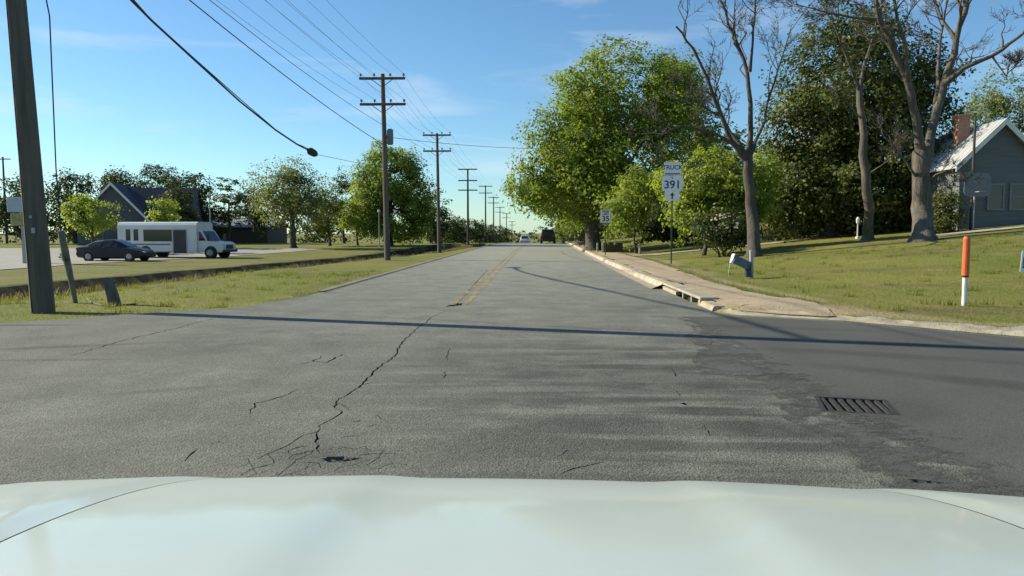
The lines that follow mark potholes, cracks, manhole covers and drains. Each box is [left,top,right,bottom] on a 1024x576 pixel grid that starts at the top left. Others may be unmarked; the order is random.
pothole [321,456,360,464]
crack [240,311,445,478]
